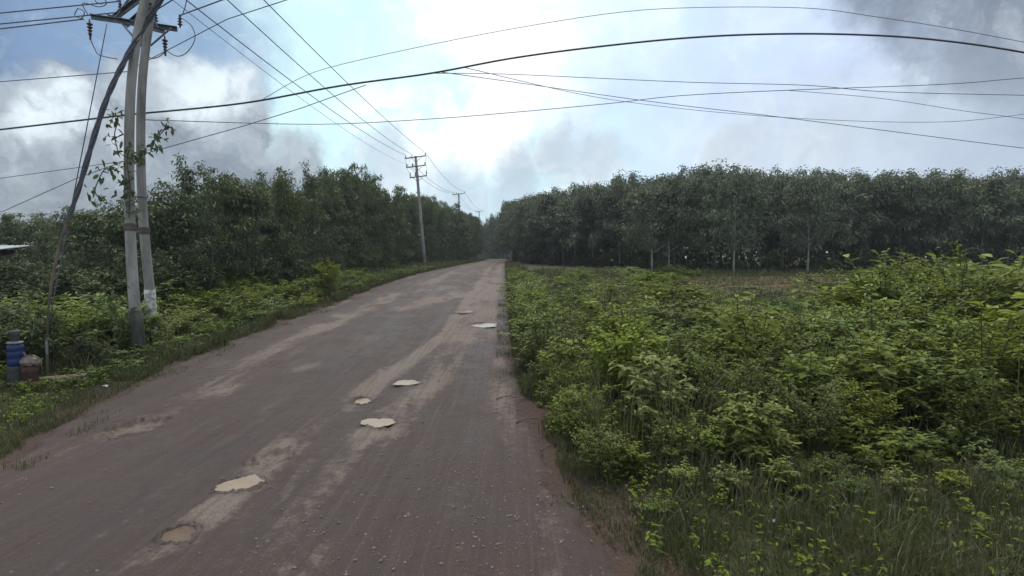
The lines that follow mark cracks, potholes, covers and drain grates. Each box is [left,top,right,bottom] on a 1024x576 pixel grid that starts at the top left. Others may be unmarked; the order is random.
pothole [154,520,202,545]
pothole [390,378,423,388]
pothole [91,415,181,439]
pothole [357,418,399,430]
pothole [209,473,269,494]
pothole [350,396,374,406]
